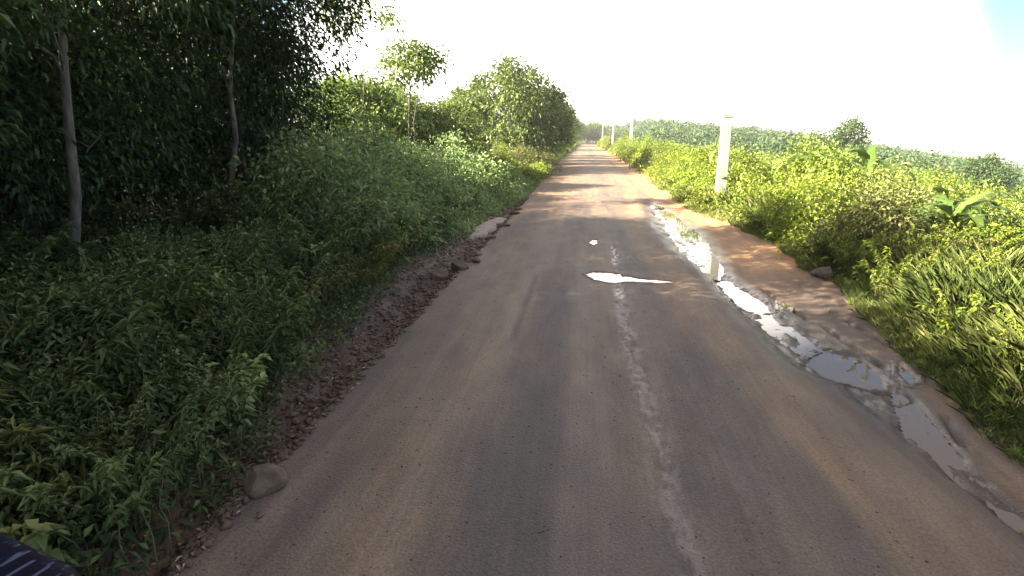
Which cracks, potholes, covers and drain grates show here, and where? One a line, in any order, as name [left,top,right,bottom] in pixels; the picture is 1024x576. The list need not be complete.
pothole [795,349,901,395]
pothole [582,271,676,284]
pothole [709,277,778,317]
pothole [890,360,926,388]
